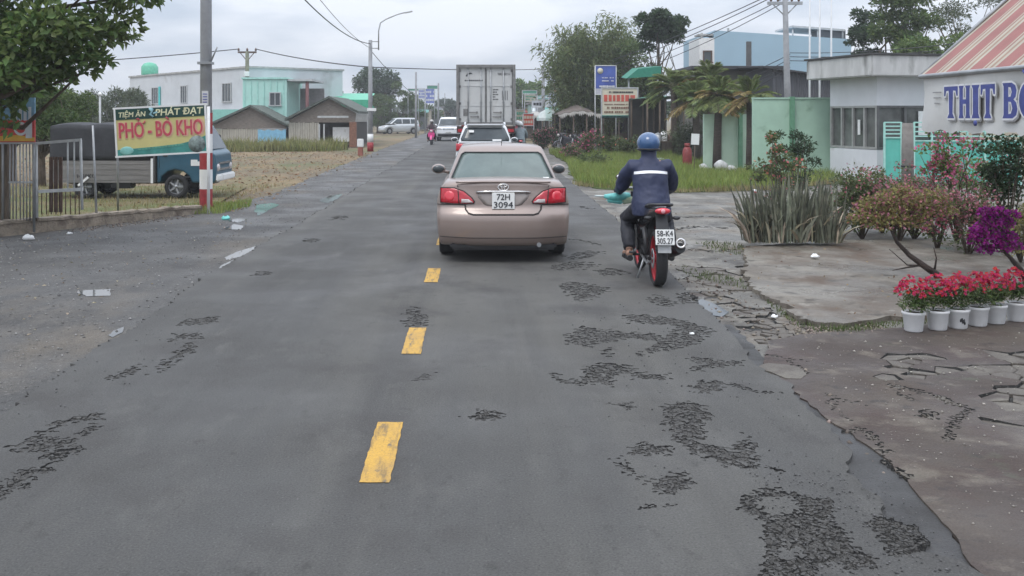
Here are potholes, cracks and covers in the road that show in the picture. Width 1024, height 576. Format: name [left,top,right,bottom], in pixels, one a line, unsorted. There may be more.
crack [873,349,1024,442]
